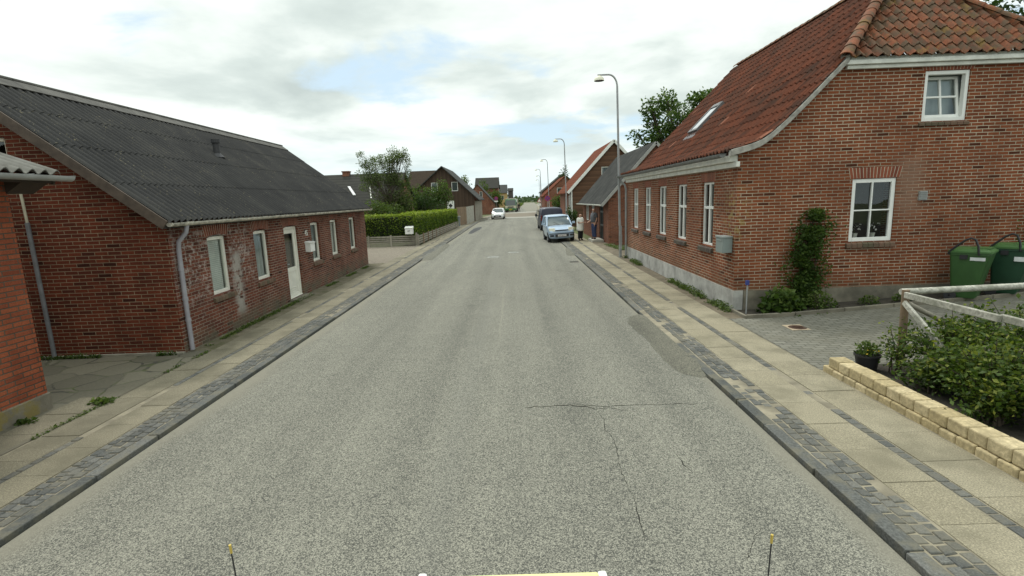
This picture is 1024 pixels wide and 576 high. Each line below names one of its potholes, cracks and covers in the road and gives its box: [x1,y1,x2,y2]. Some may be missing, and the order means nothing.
crack [525,403,681,540]
